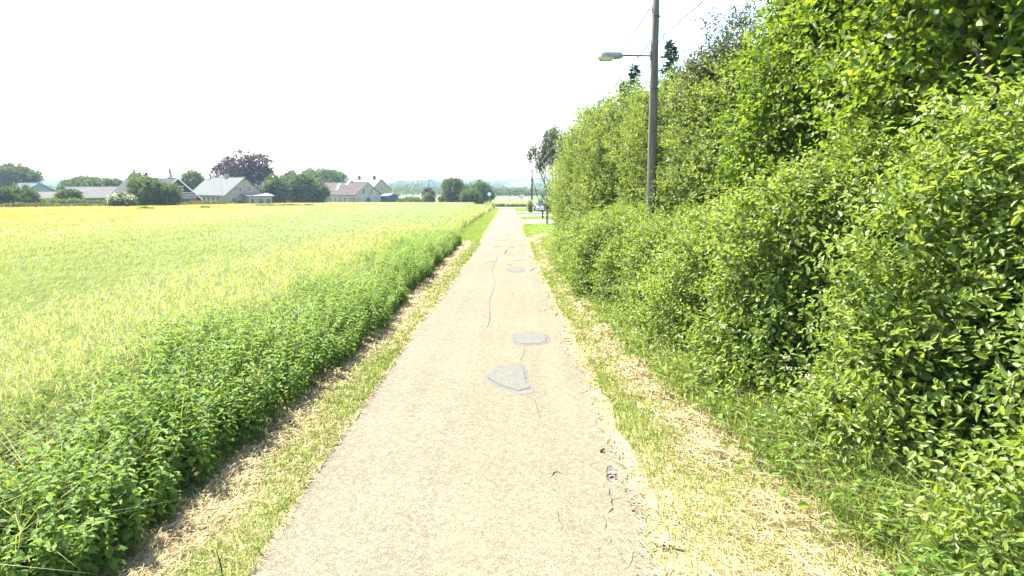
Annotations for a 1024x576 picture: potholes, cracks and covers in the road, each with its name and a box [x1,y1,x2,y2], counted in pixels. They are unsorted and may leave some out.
crack [604,488,628,568]
crack [484,234,535,328]
